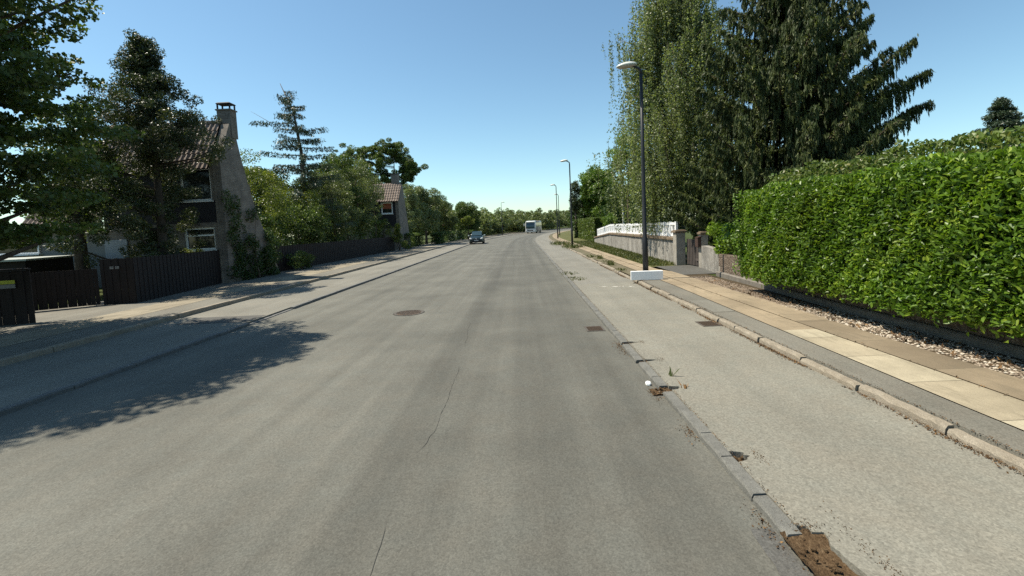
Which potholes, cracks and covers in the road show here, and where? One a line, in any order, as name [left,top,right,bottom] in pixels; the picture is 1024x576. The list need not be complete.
pothole [779,528,887,576]
